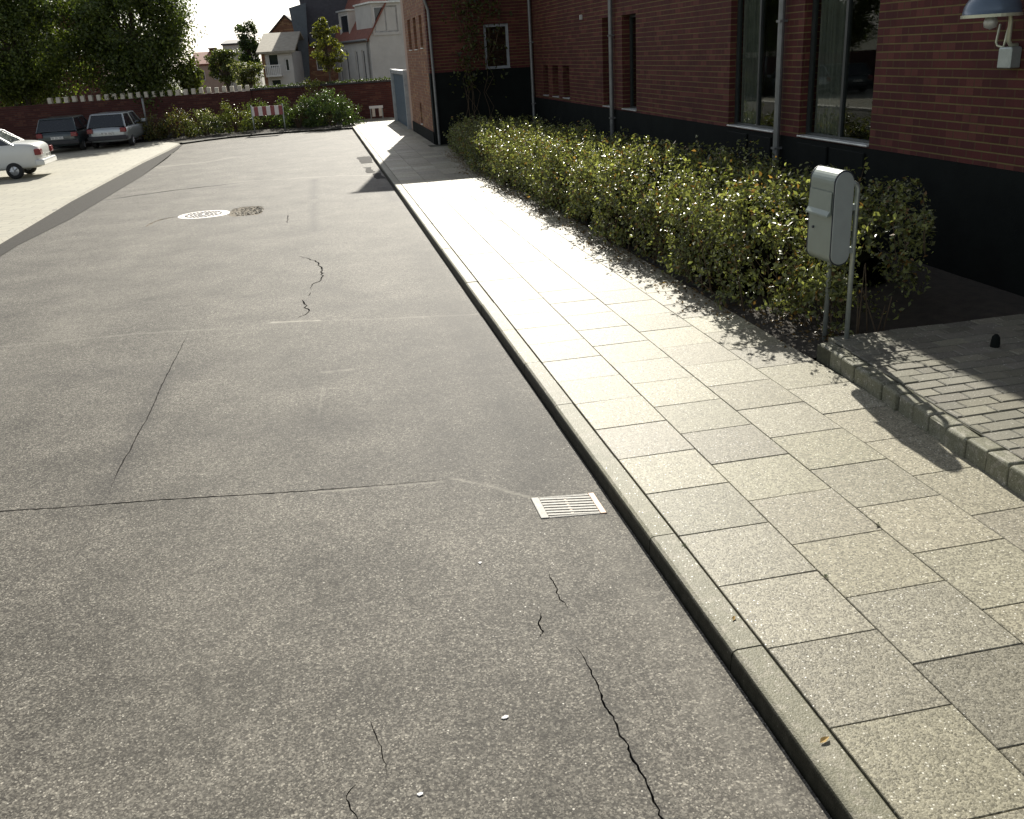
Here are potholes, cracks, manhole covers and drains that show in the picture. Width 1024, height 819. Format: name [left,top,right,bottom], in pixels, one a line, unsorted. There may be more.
crack [369,720,387,773]
drain grate [531,493,607,519]
crack [298,256,324,318]
crack [538,572,568,637]
crack [576,647,664,819]
crack [346,781,358,819]
manhole cover [177,210,230,219]
